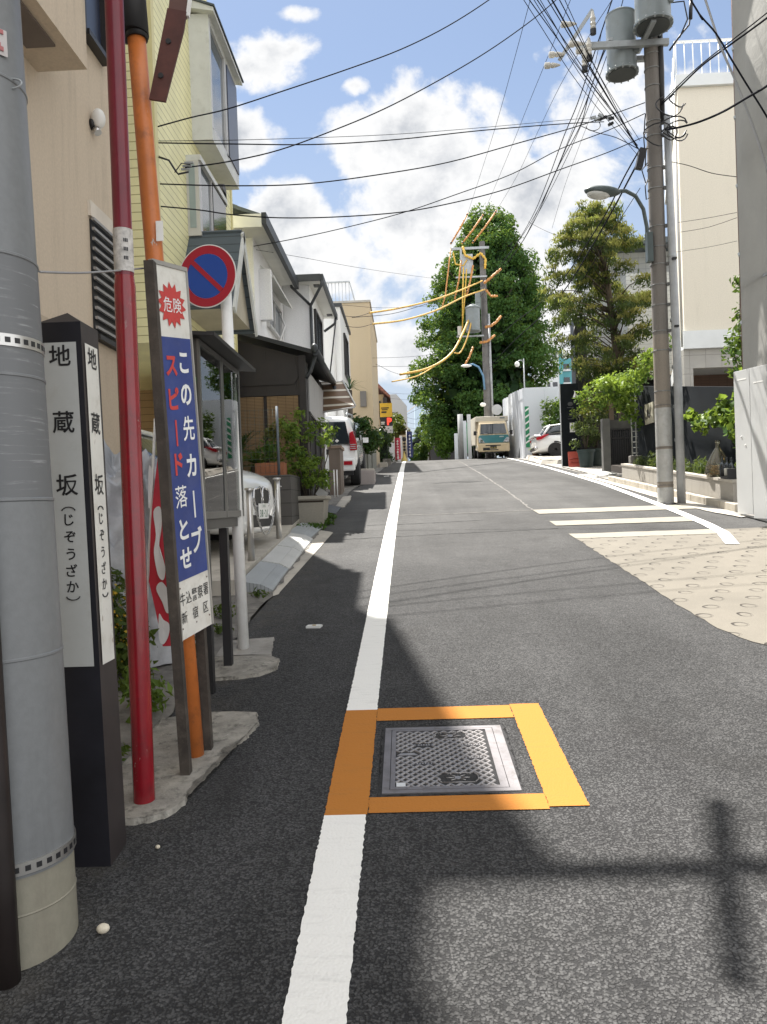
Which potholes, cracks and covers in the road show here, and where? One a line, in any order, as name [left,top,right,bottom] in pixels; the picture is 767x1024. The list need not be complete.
manhole cover [382,725,522,794]
